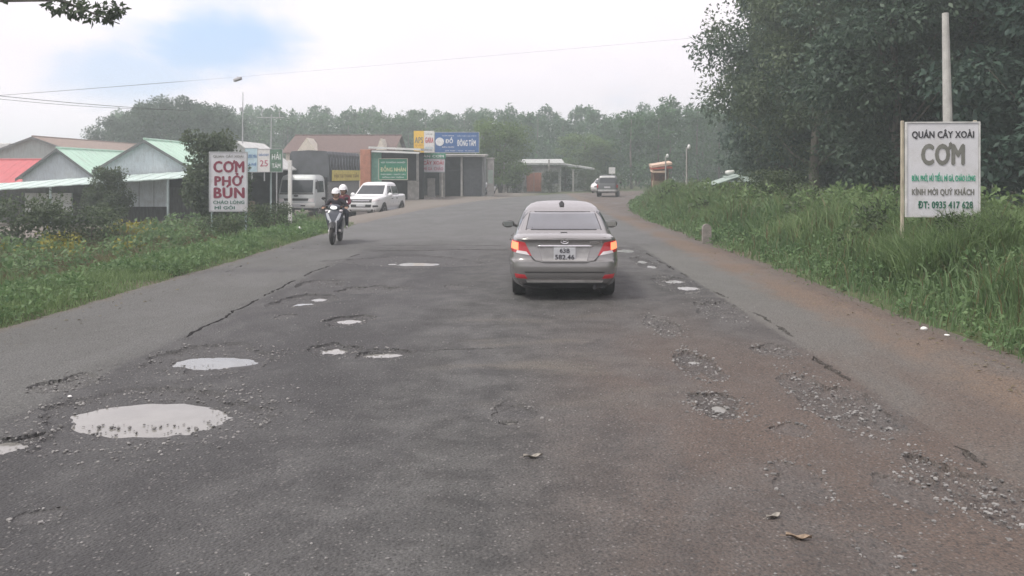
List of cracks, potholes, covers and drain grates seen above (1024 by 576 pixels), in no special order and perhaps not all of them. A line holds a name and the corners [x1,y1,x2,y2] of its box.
pothole [484,398,544,428]
pothole [677,386,761,424]
pothole [264,290,340,308]
pothole [890,443,1024,541]
pothole [640,312,691,339]
pothole [321,311,378,328]
pothole [0,376,331,468]
pothole [294,341,364,359]
pothole [99,340,298,380]
pothole [759,362,921,458]
